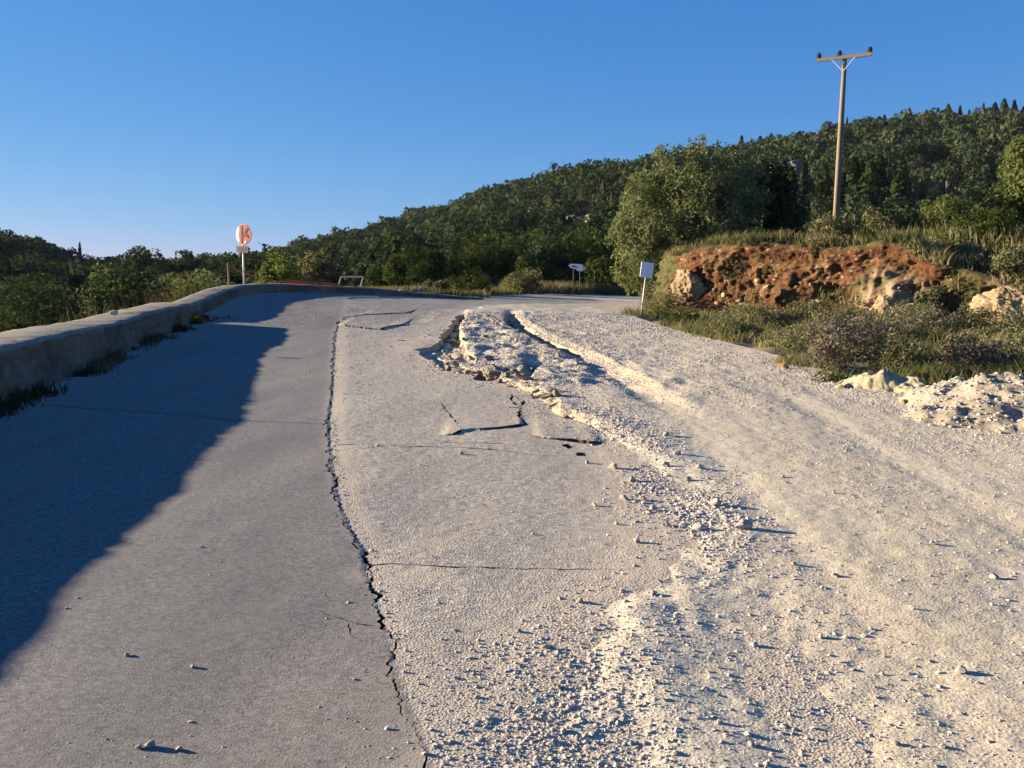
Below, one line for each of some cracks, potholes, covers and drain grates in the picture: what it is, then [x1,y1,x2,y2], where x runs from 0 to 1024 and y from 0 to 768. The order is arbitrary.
crack [340,394,602,456]
crack [336,311,413,341]
pothole [519,363,538,377]
pothole [503,314,594,361]
